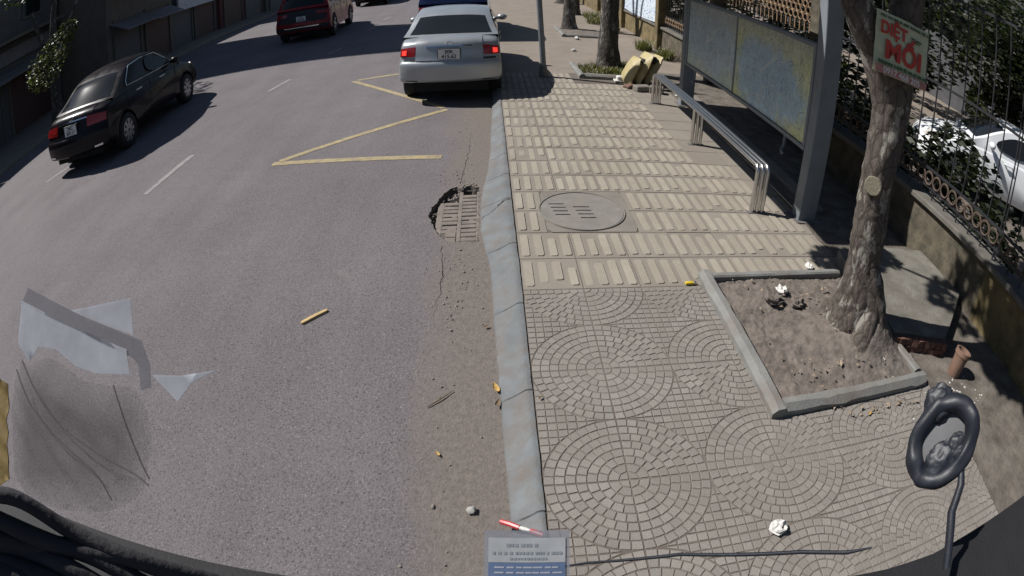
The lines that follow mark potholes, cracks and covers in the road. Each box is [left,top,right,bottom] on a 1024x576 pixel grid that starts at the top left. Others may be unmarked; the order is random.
manhole cover [538,191,637,232]
drain grate [435,192,479,247]
